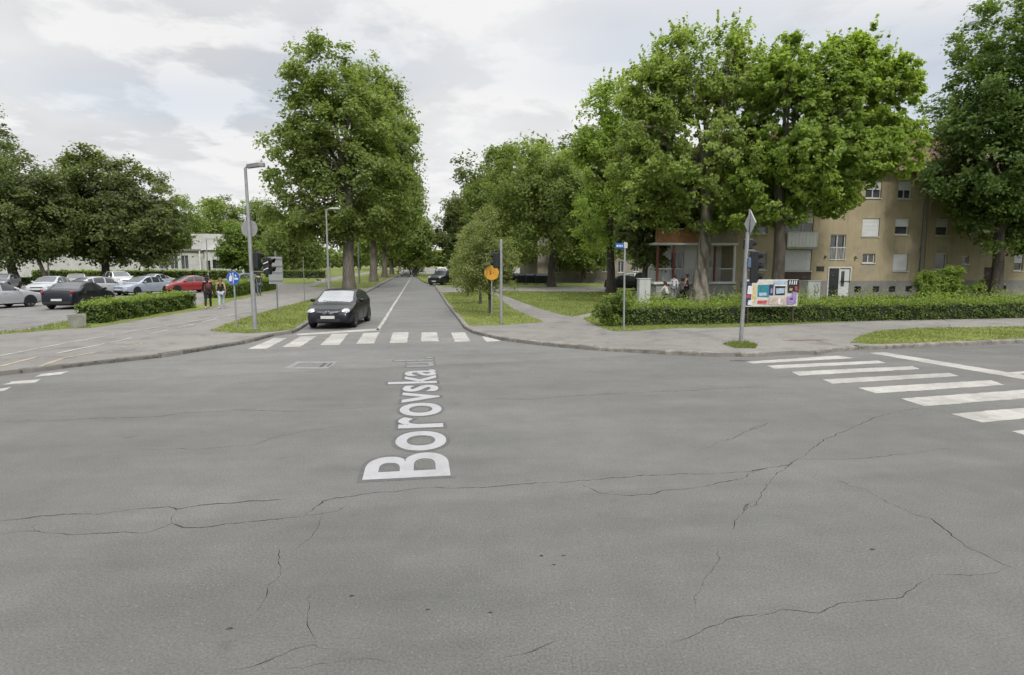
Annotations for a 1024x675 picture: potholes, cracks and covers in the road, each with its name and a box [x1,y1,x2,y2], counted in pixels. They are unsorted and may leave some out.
crack [2,408,927,608]
manhole cover [284,361,338,369]
crack [238,597,404,670]
crack [834,479,1016,569]
crack [668,572,997,646]
